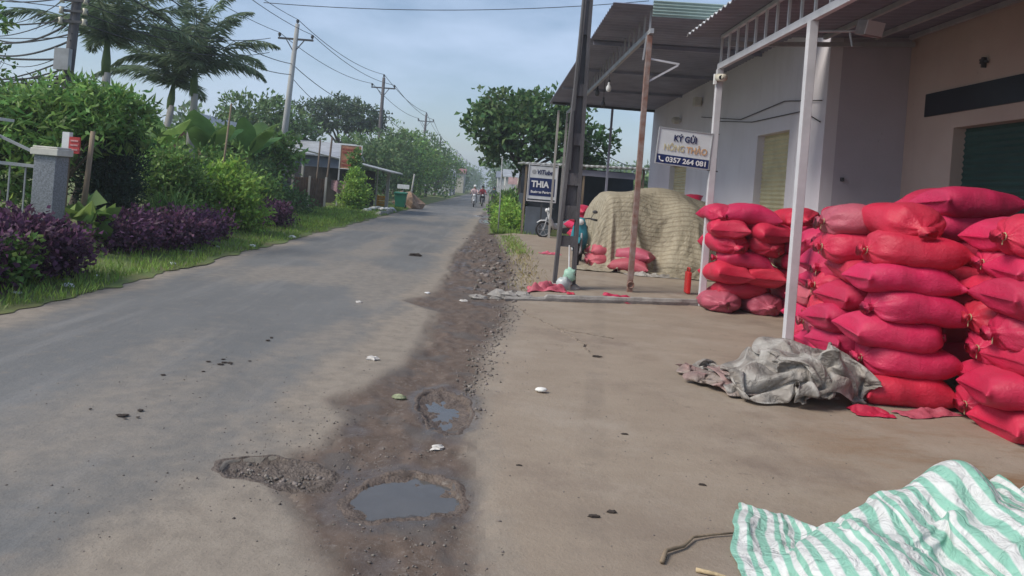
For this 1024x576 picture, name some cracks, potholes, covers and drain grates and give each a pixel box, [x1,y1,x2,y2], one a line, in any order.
crack [520,309,614,355]
pothole [211,454,342,495]
pothole [414,386,475,436]
pothole [336,470,471,526]
